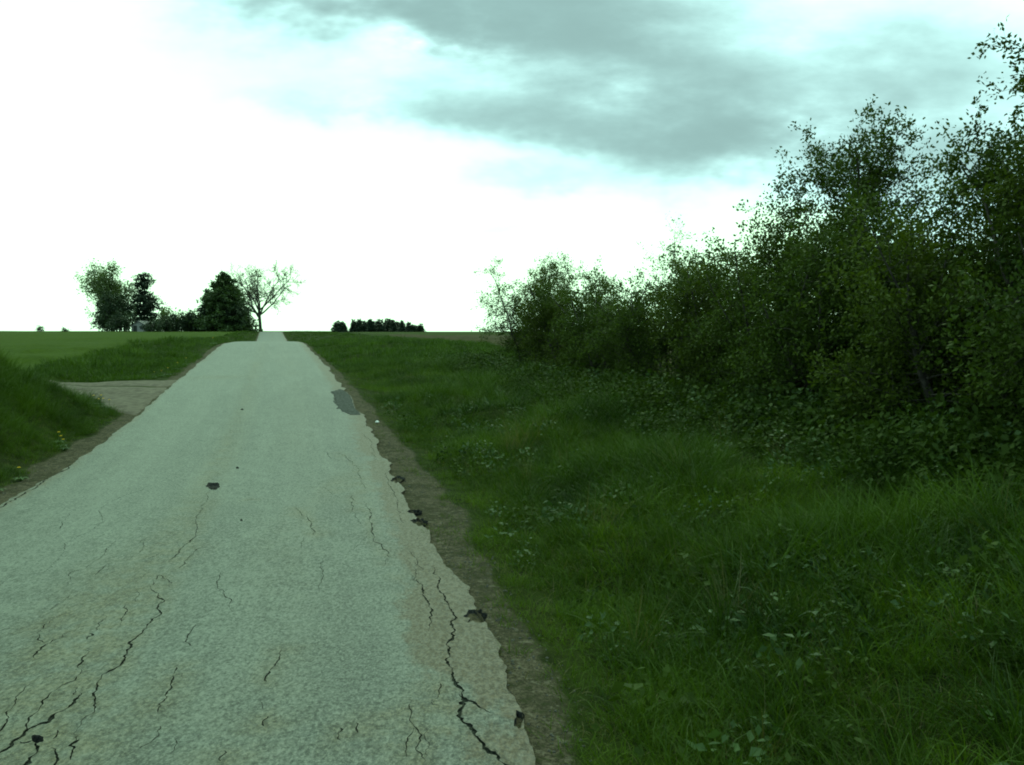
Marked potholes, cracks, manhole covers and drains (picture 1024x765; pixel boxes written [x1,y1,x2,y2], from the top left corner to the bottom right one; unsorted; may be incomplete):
pothole [464,609,488,622]
crack [327,436,508,765]
crack [0,484,210,765]
